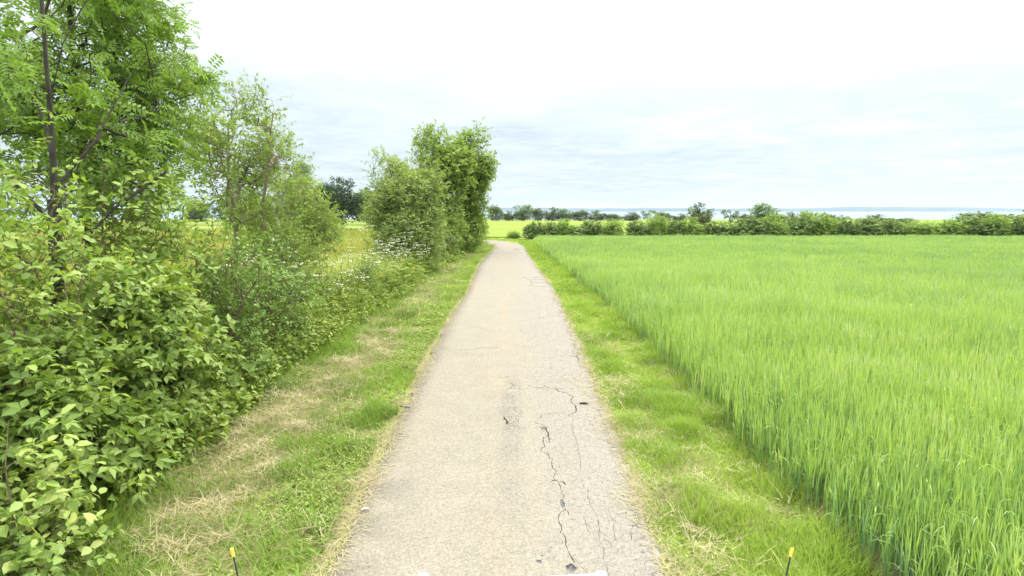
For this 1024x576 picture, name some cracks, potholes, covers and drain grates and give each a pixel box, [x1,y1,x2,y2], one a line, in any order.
crack [498,290,649,575]
